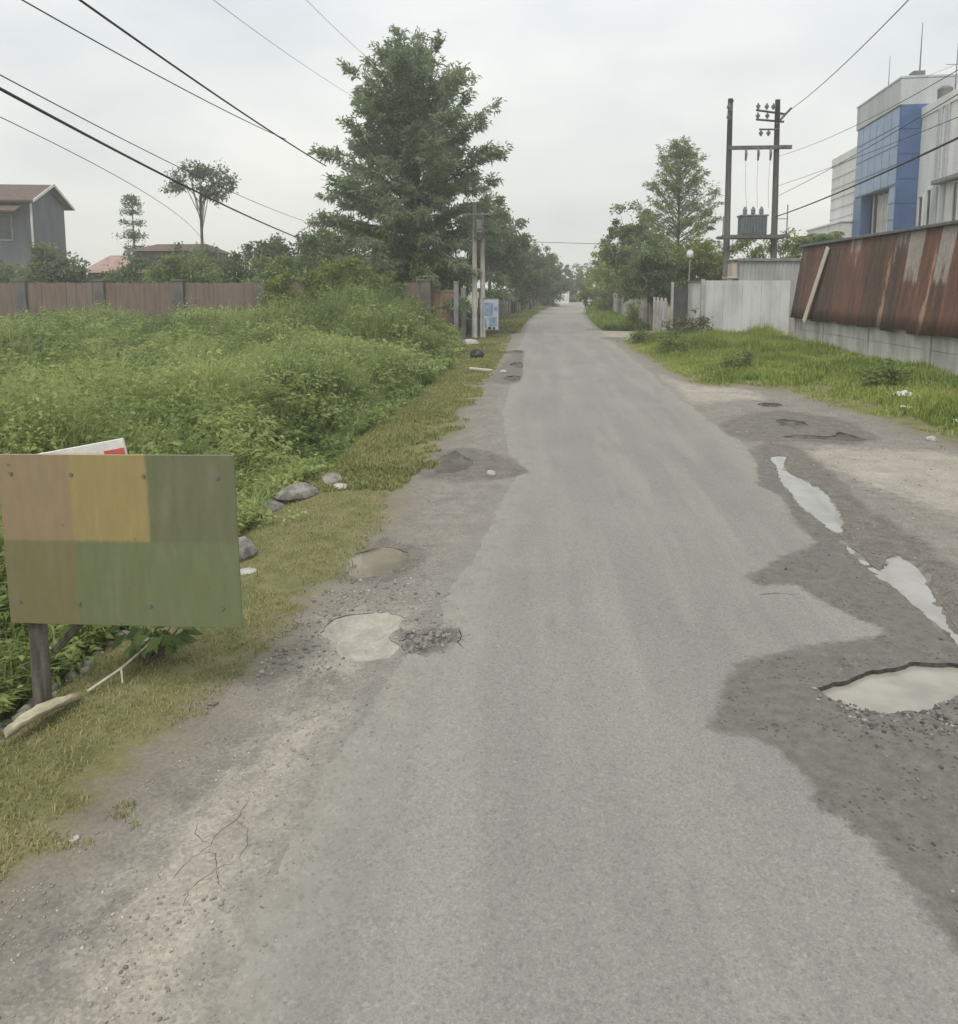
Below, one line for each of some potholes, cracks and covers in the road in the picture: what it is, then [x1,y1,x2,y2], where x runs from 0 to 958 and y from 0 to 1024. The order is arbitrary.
pothole [776,419,808,428]
pothole [399,628,452,654]
pothole [838,538,958,647]
pothole [818,662,958,715]
pothole [346,547,409,579]
crack [167,801,249,906]
pothole [770,456,846,535]
